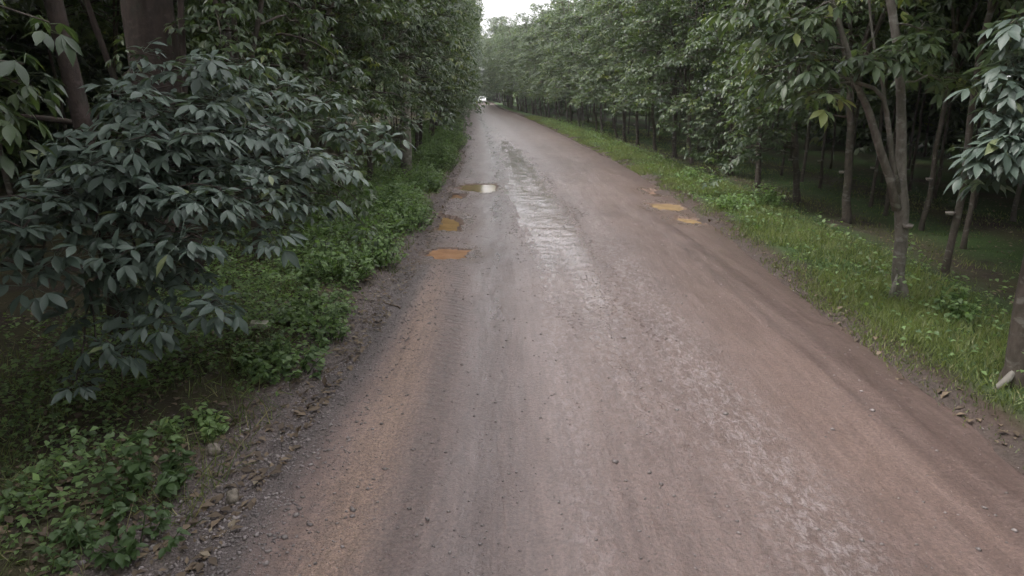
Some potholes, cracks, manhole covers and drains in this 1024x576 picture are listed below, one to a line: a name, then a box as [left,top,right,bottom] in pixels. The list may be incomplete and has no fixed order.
pothole [424,247,472,260]
pothole [673,215,706,224]
pothole [454,183,499,193]
pothole [434,213,464,232]
pothole [647,202,686,211]
